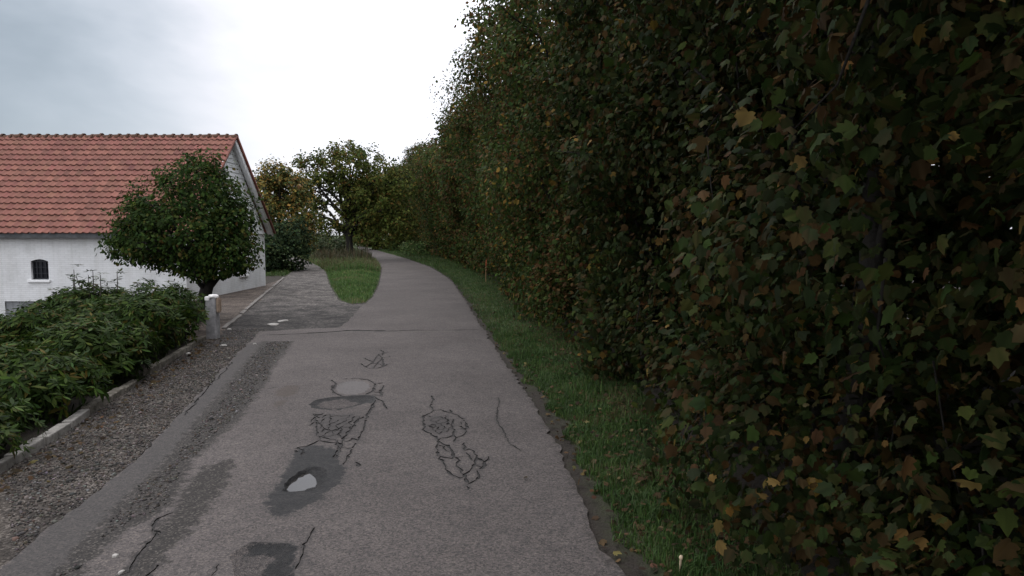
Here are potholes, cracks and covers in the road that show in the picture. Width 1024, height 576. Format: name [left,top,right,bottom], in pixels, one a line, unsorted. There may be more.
crack [295,527,315,569]
crack [422,396,490,490]
pothole [282,467,328,492]
crack [122,512,173,576]
crack [294,350,390,467]
